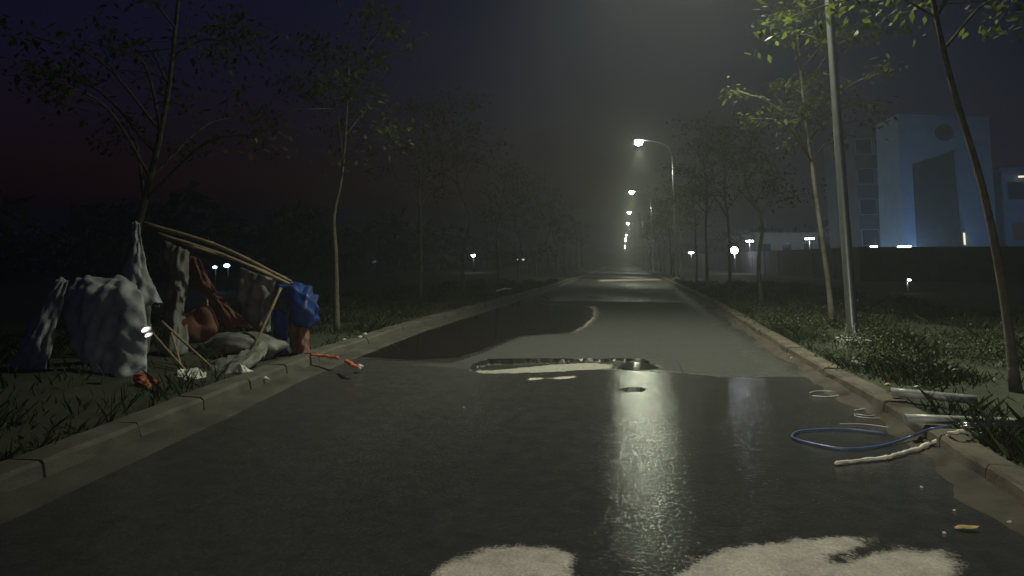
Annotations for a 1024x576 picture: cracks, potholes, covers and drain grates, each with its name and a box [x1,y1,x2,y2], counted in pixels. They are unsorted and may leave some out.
pothole [467,358,663,374]
